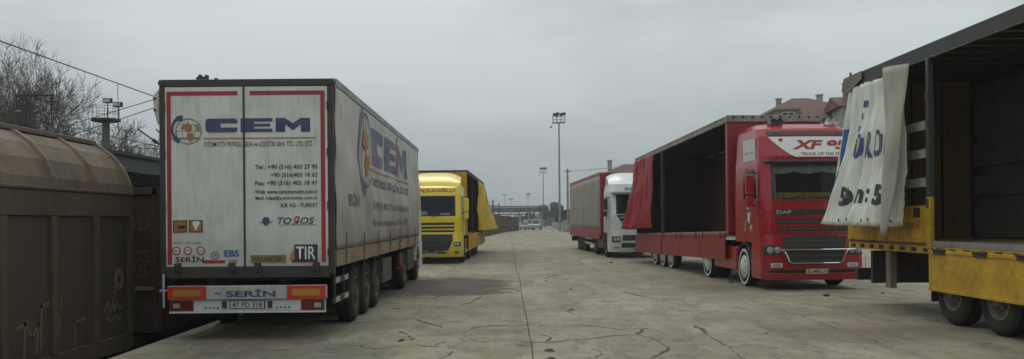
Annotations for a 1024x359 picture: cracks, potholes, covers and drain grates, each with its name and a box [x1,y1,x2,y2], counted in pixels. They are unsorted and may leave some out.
crack [353,275,671,359]
crack [693,301,931,359]
